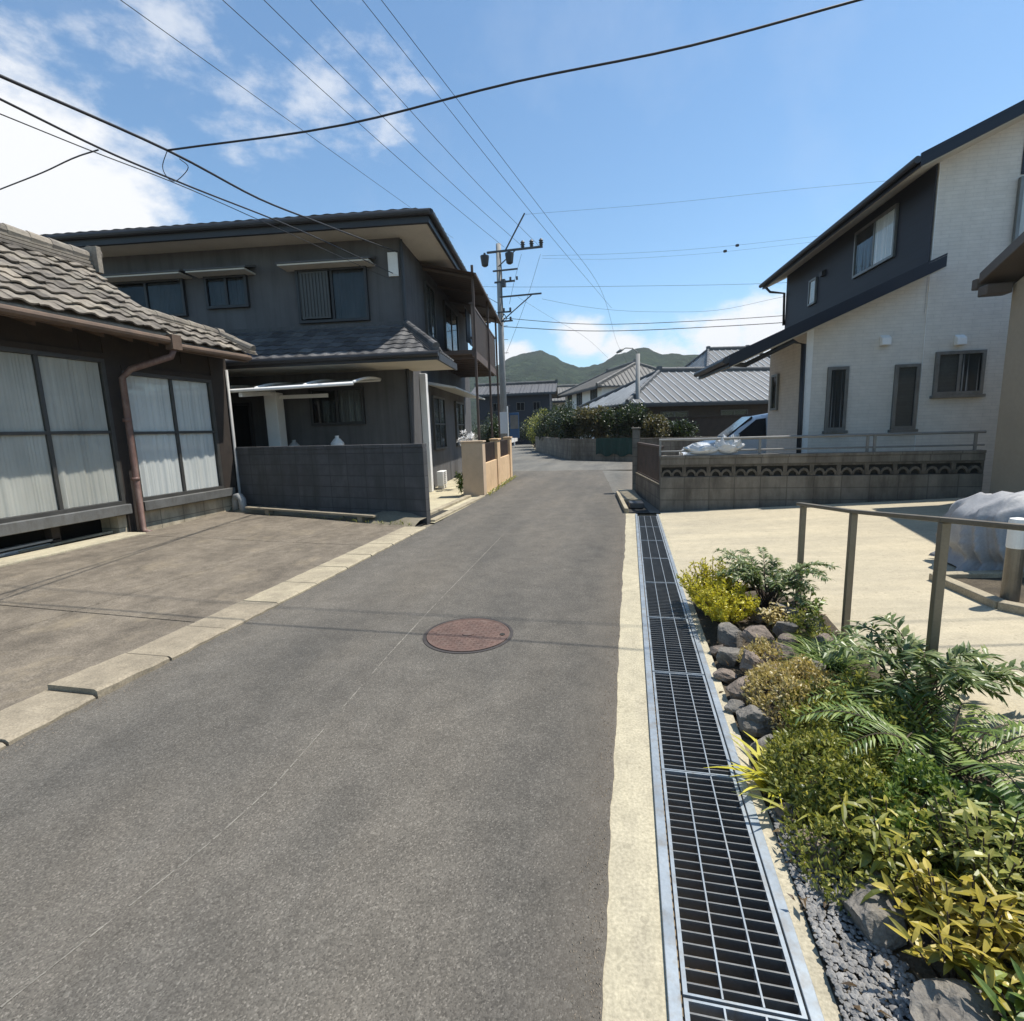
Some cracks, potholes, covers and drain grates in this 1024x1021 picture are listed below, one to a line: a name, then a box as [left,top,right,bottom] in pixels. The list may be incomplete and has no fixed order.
drain grate [644,582,687,619]
drain grate [647,617,704,675]
drain grate [638,516,660,527]
manhole cover [423,617,513,654]
drain grate [639,527,664,541]
drain grate [683,997,796,1021]
drain grate [652,672,735,777]
drain grate [642,558,677,583]
drain grate [640,540,669,559]
